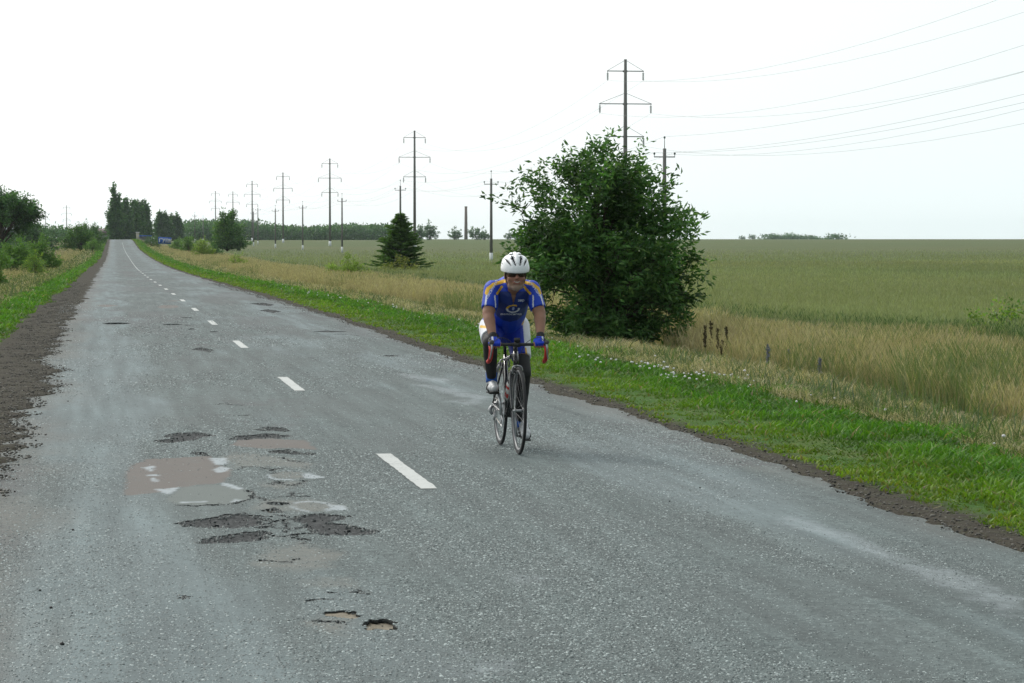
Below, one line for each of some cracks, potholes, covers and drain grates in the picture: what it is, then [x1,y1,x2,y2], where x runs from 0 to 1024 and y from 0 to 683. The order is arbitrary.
pothole [361,619,398,630]
pothole [155,432,216,443]
pothole [324,610,363,619]
pothole [292,513,380,536]
pothole [197,530,273,544]
pothole [174,512,270,529]
